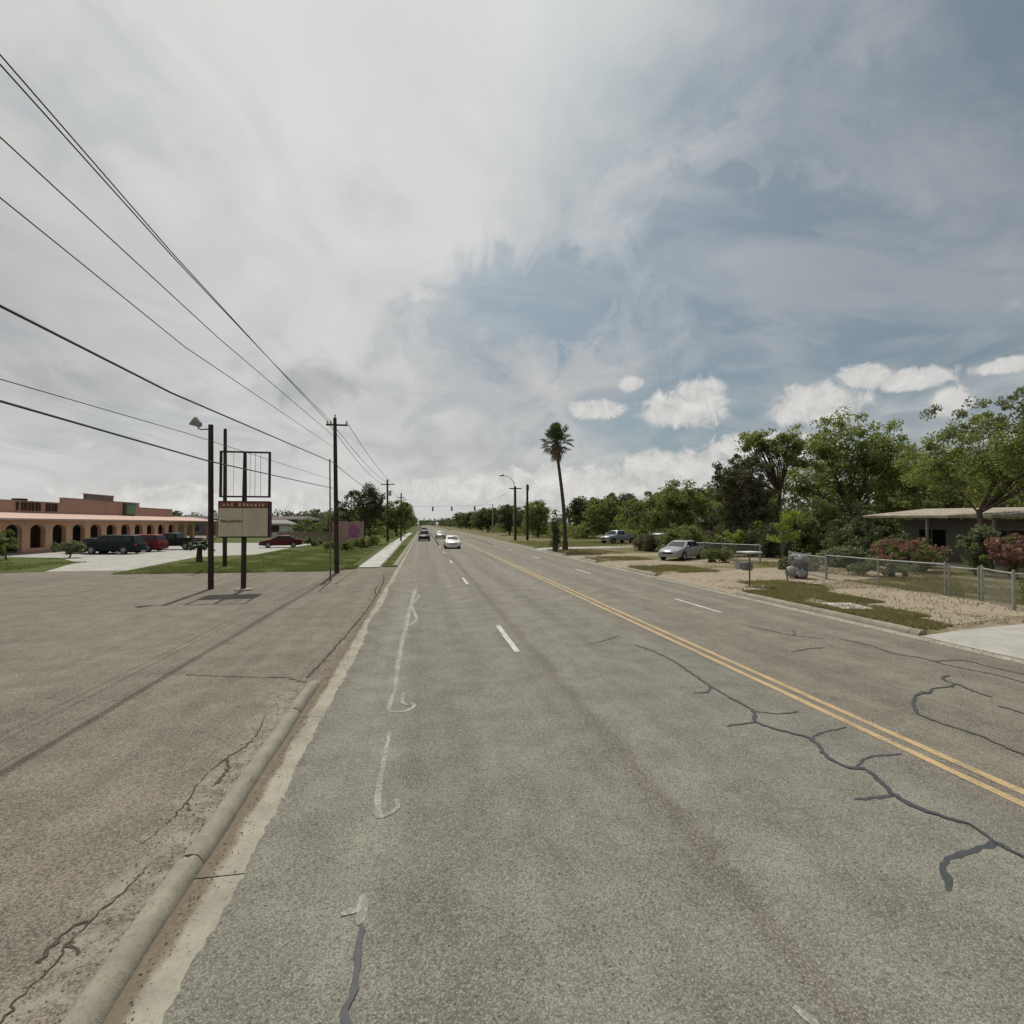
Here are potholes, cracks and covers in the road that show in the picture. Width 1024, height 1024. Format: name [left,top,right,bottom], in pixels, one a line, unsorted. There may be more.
crack [142,716,266,845]
crack [844,639,1024,683]
crack [0,866,147,1023]
crack [750,626,824,652]
